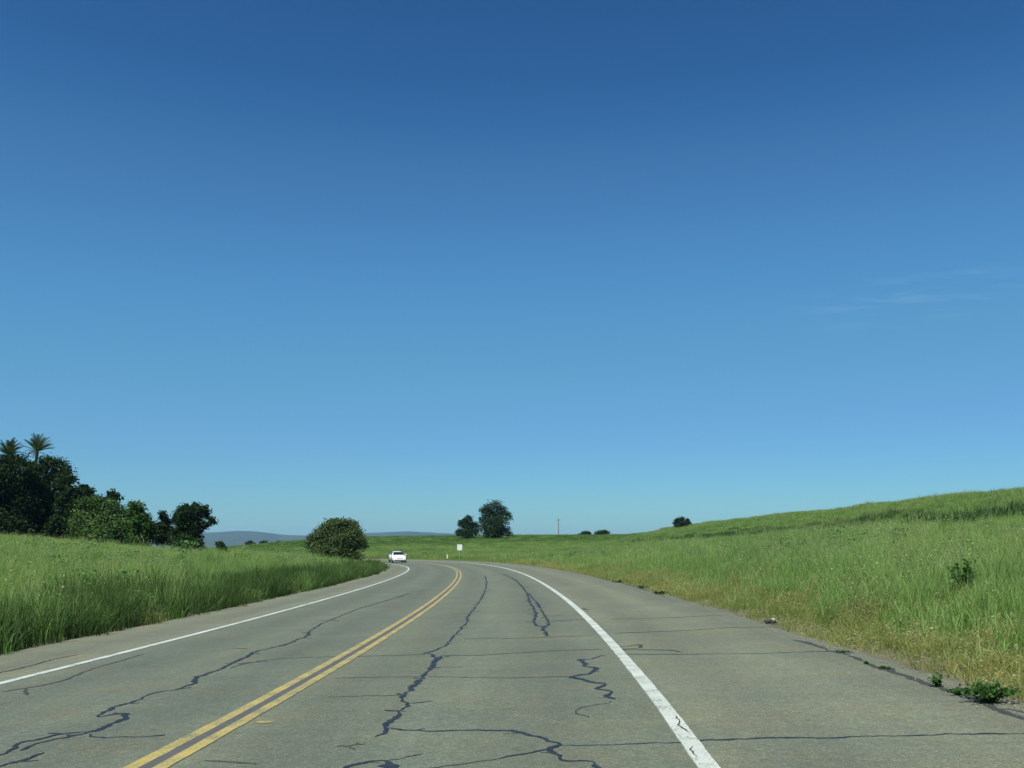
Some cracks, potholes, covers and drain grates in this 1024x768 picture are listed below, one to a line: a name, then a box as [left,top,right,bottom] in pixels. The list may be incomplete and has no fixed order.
crack [231,615,1024,720]
crack [0,654,143,695]
